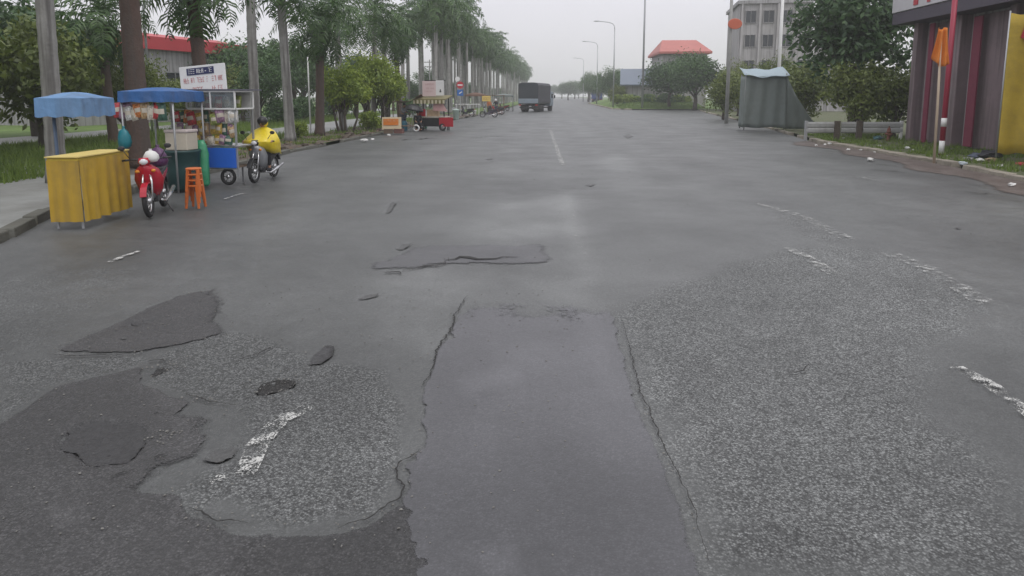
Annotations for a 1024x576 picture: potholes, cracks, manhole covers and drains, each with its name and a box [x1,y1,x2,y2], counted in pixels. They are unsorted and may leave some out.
pothole [256,379,296,396]
pothole [309,345,334,365]
crack [421,295,468,387]
crack [386,256,509,273]
